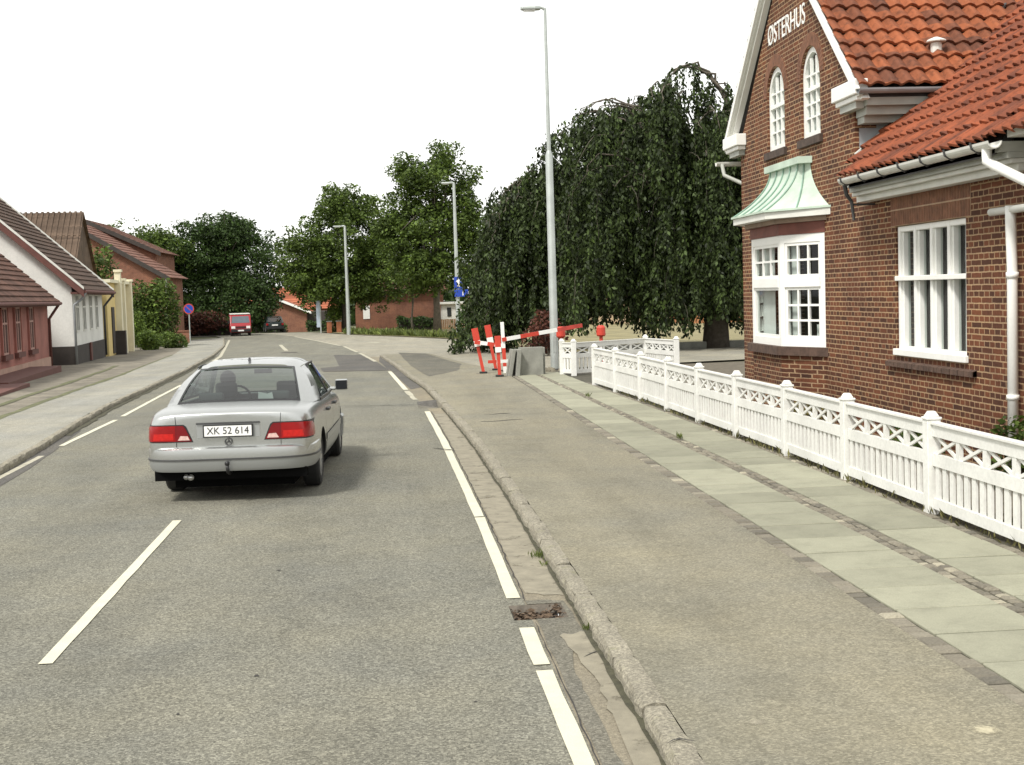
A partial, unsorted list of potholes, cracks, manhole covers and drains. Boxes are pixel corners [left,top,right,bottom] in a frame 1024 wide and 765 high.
drain grate [509,603,568,621]
